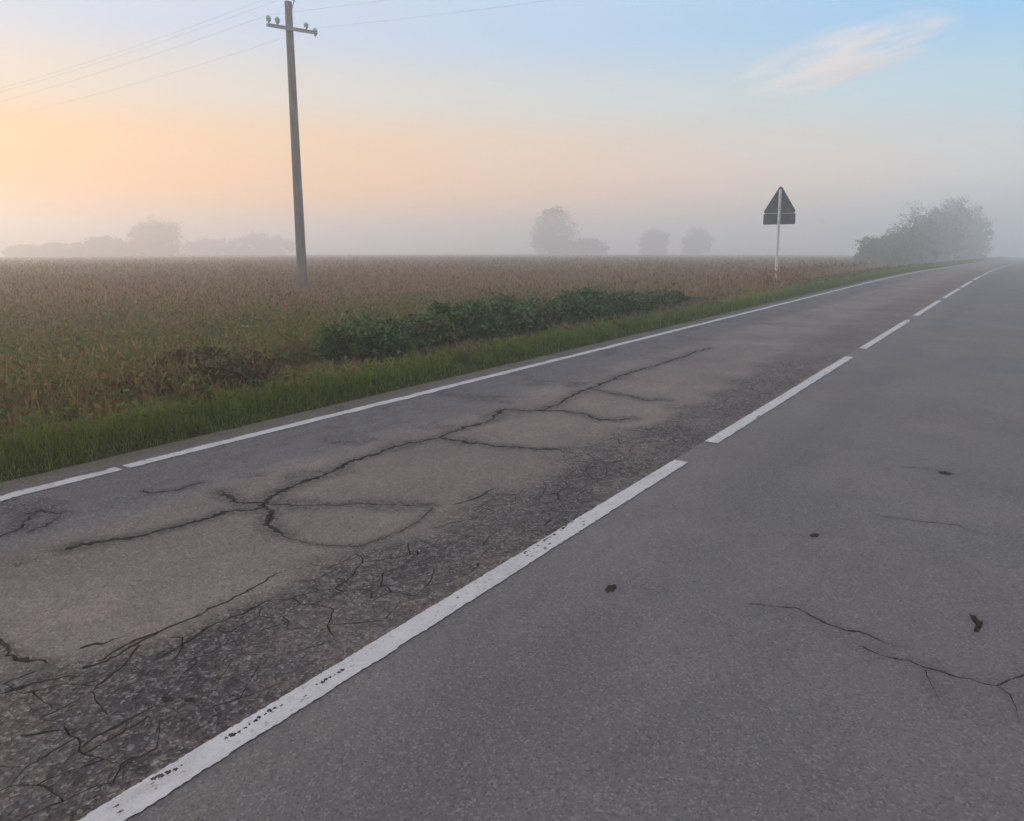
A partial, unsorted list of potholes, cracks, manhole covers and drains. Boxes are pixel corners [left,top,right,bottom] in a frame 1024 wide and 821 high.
crack [0,362,812,821]
crack [750,603,1024,719]
pothole [969,614,983,633]
